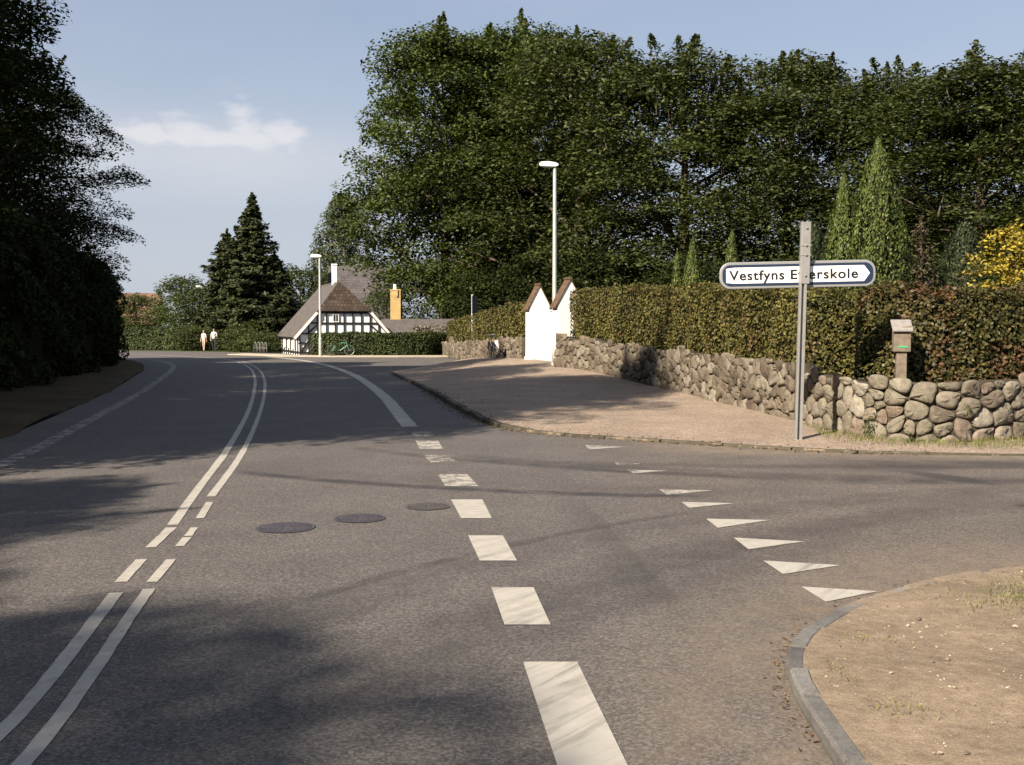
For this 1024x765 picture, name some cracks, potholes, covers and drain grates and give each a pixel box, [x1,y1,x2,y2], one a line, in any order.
manhole cover [333,513,386,523]
manhole cover [255,522,315,533]
